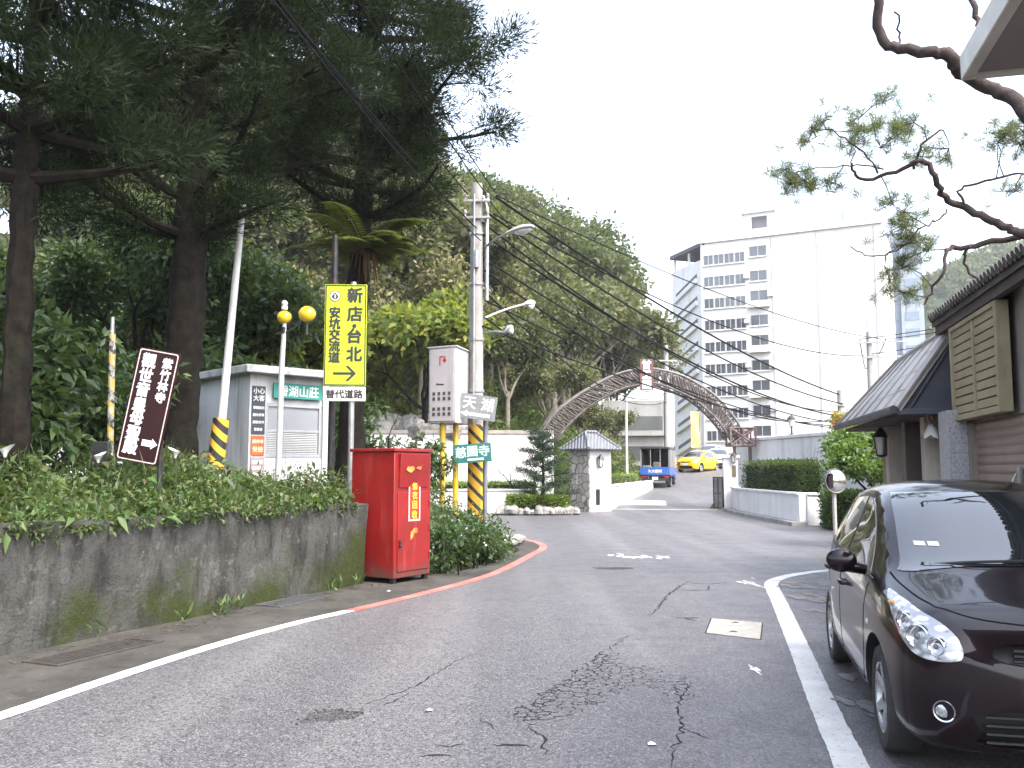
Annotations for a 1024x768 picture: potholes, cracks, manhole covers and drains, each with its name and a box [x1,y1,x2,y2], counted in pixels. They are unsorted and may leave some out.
crack [369,653,476,708]
manhole cover [705,618,763,640]
drain grate [22,637,163,667]
crack [648,582,727,621]
crack [480,634,711,768]
drain grate [253,594,332,608]
